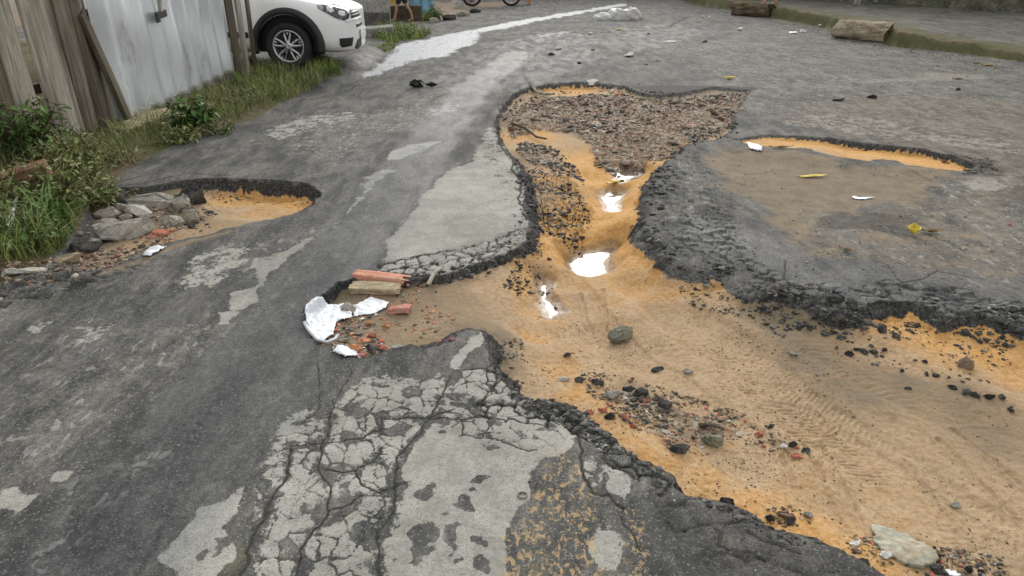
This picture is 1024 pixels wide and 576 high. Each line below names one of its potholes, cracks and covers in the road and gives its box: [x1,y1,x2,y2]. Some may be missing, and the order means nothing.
crack [885,268,993,302]
crack [239,363,671,576]
pothole [63,177,323,272]
pothole [301,82,1024,576]
